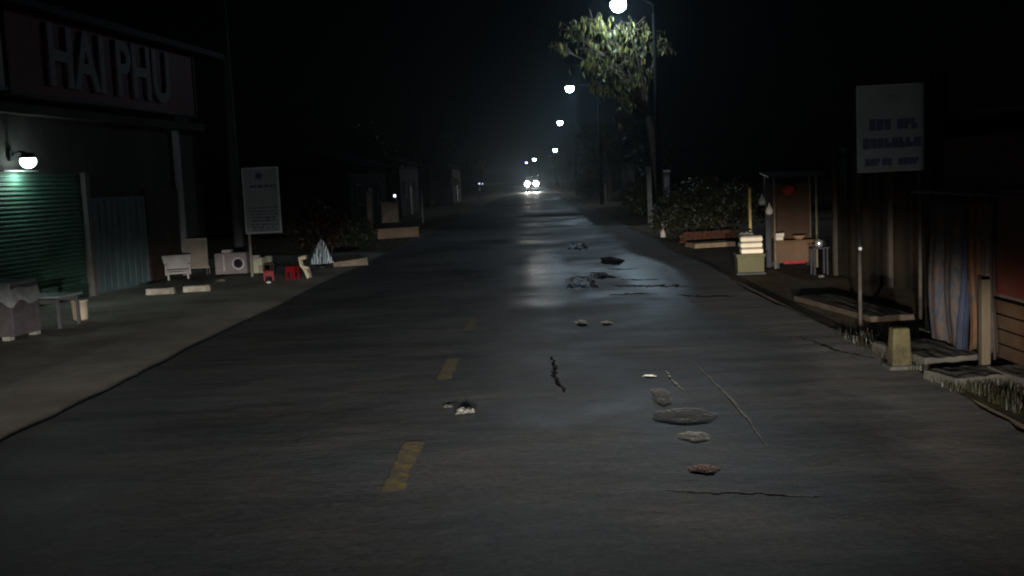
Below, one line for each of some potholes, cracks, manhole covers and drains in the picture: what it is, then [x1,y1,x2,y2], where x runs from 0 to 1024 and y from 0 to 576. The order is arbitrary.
pothole [565,242,588,251]
crack [608,268,738,297]
crack [665,362,767,447]
pothole [566,276,599,290]
crack [665,490,830,498]
pothole [589,272,616,280]
crack [799,335,877,359]
pothole [599,256,625,265]
